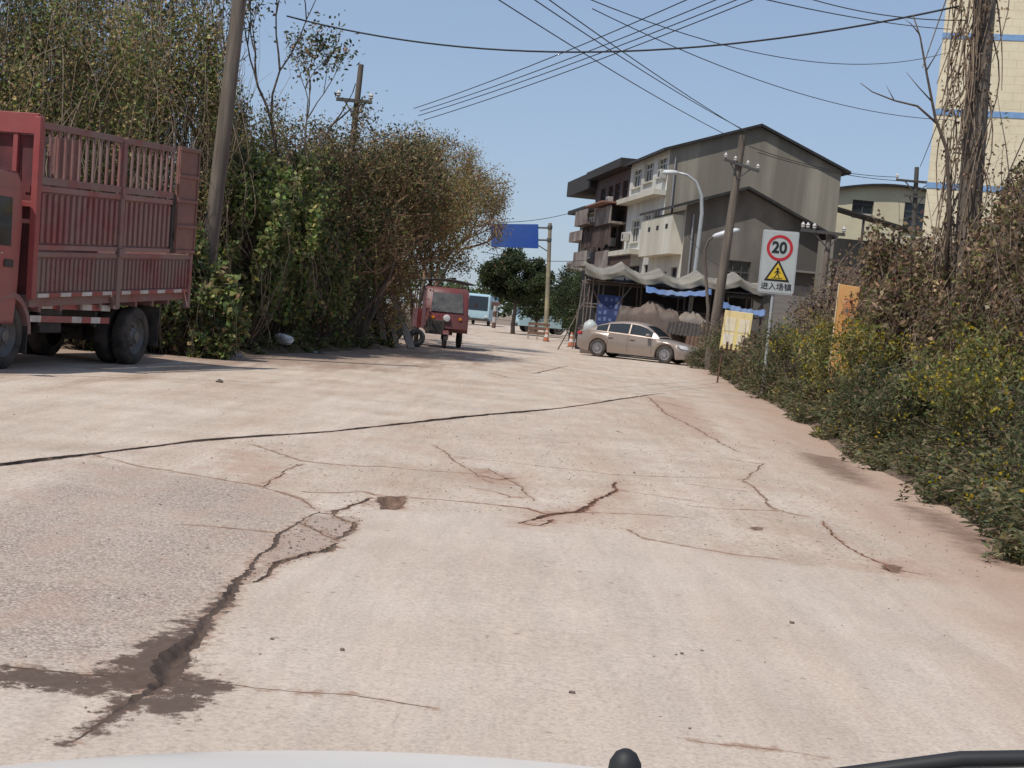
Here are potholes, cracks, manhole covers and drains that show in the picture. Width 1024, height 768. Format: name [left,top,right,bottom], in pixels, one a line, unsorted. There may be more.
crack [822,521,922,575]
crack [0,397,805,741]
pothole [375,496,408,510]
